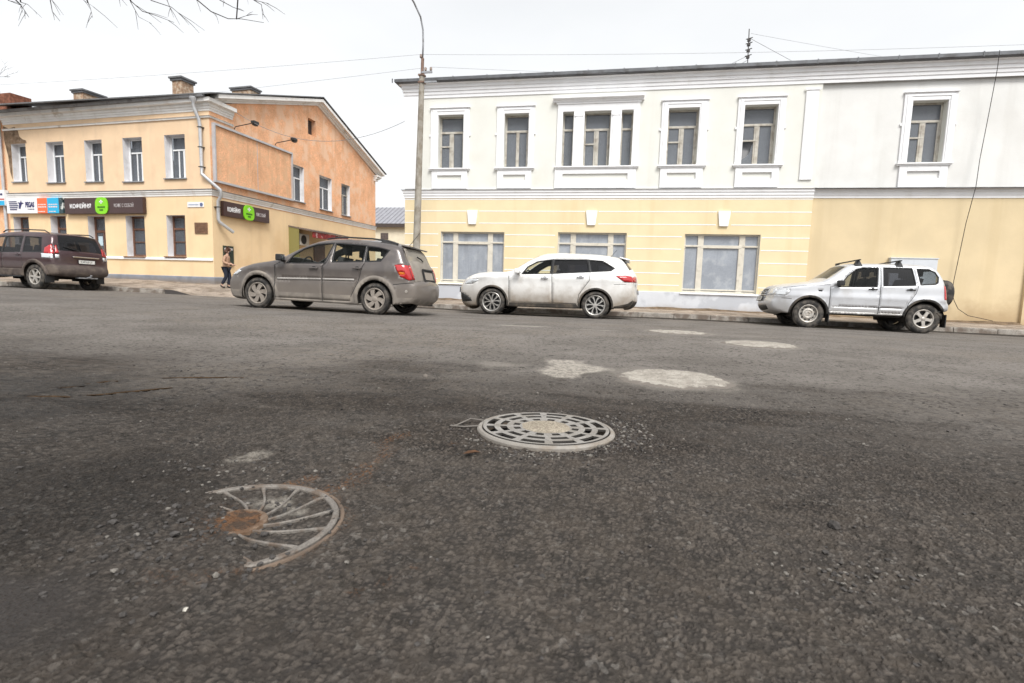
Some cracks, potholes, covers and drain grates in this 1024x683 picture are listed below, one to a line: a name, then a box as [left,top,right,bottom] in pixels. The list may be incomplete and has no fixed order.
crack [30,377,244,398]
manhole cover [477,412,615,453]
manhole cover [205,484,345,571]
